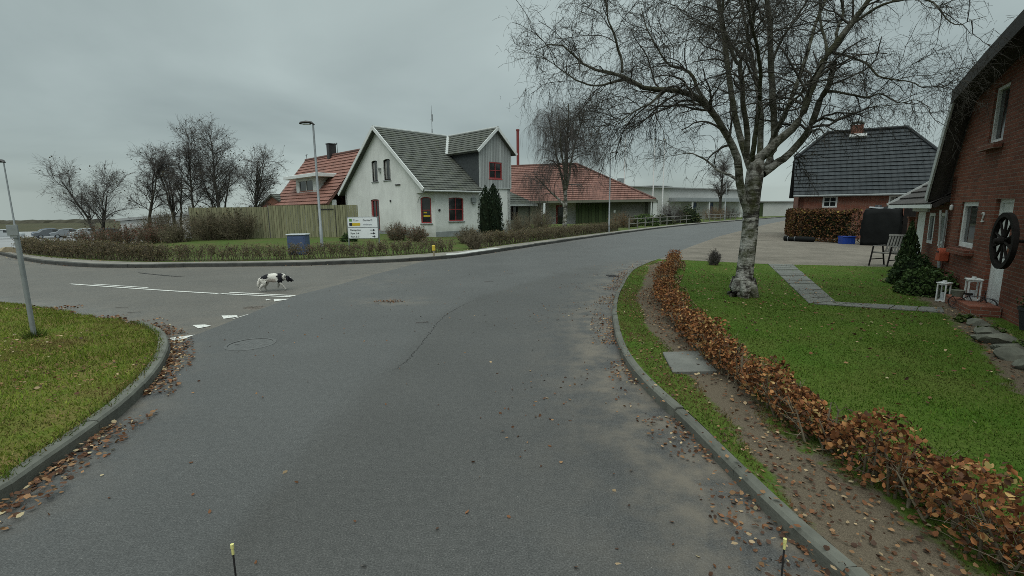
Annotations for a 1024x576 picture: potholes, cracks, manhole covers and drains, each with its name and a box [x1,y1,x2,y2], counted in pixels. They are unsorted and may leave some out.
manhole cover [223,338,277,351]
